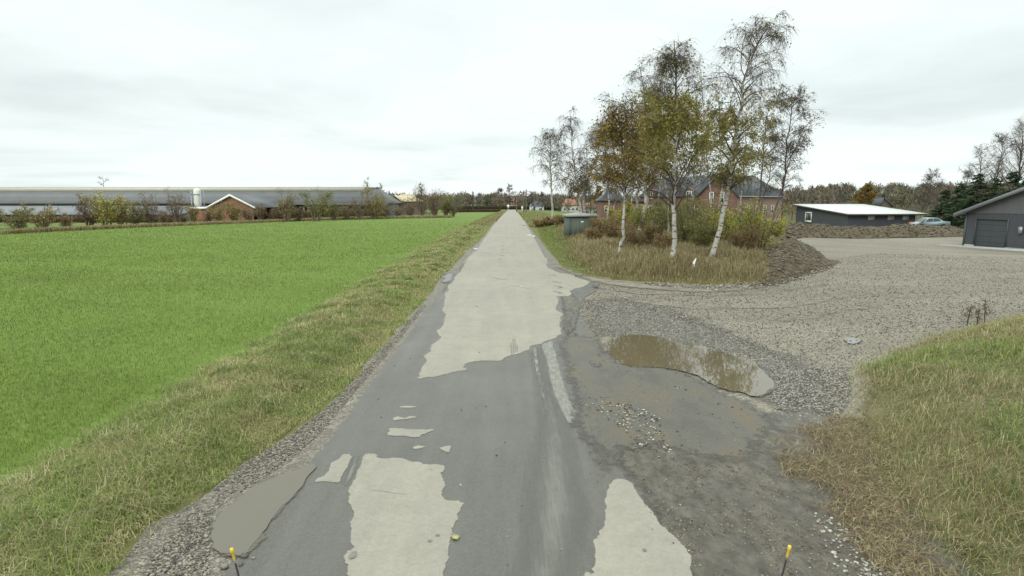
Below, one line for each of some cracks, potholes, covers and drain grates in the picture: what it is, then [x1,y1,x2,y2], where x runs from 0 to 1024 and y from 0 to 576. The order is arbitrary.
pothole [210,464,316,556]
pothole [607,334,778,397]
